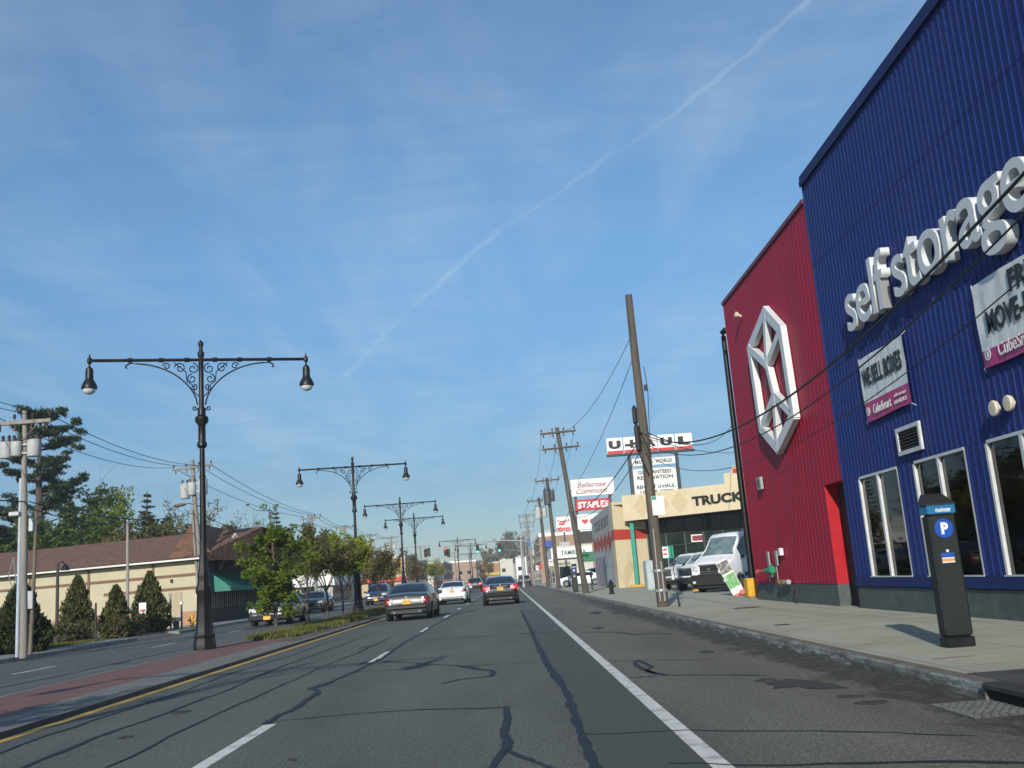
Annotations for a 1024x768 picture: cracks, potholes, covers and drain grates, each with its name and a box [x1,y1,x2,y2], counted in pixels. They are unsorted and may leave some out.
crack [272,707,500,722]
crack [614,659,739,677]
drain grate [927,669,1024,719]
crack [324,644,541,687]
